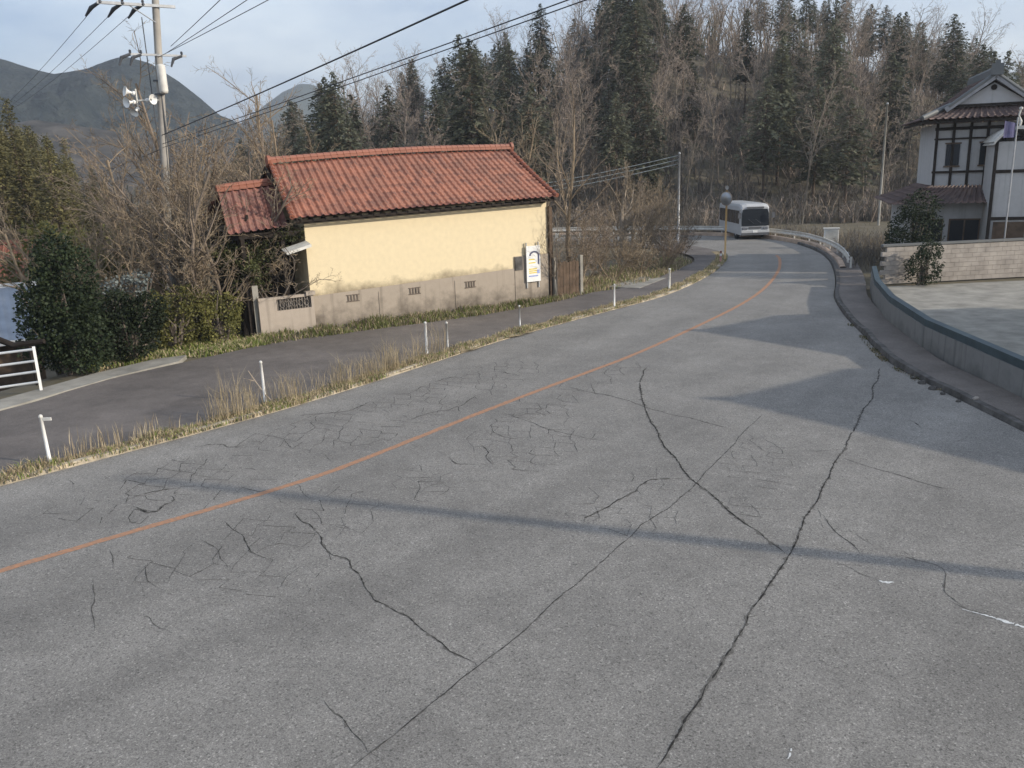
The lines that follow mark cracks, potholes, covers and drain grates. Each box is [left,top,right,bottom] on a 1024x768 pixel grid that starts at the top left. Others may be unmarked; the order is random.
crack [127,486,477,666]
crack [42,352,539,524]
crack [396,362,990,767]
crack [324,701,385,765]
